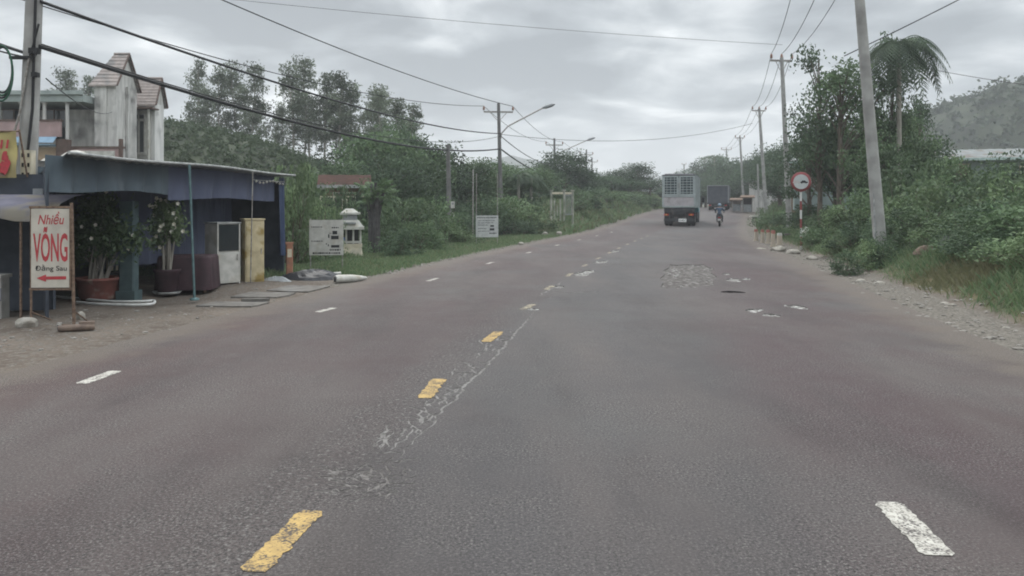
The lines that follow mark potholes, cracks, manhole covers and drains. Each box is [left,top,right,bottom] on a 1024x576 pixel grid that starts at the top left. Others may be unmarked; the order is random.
pothole [660,264,717,289]
crack [308,456,421,502]
